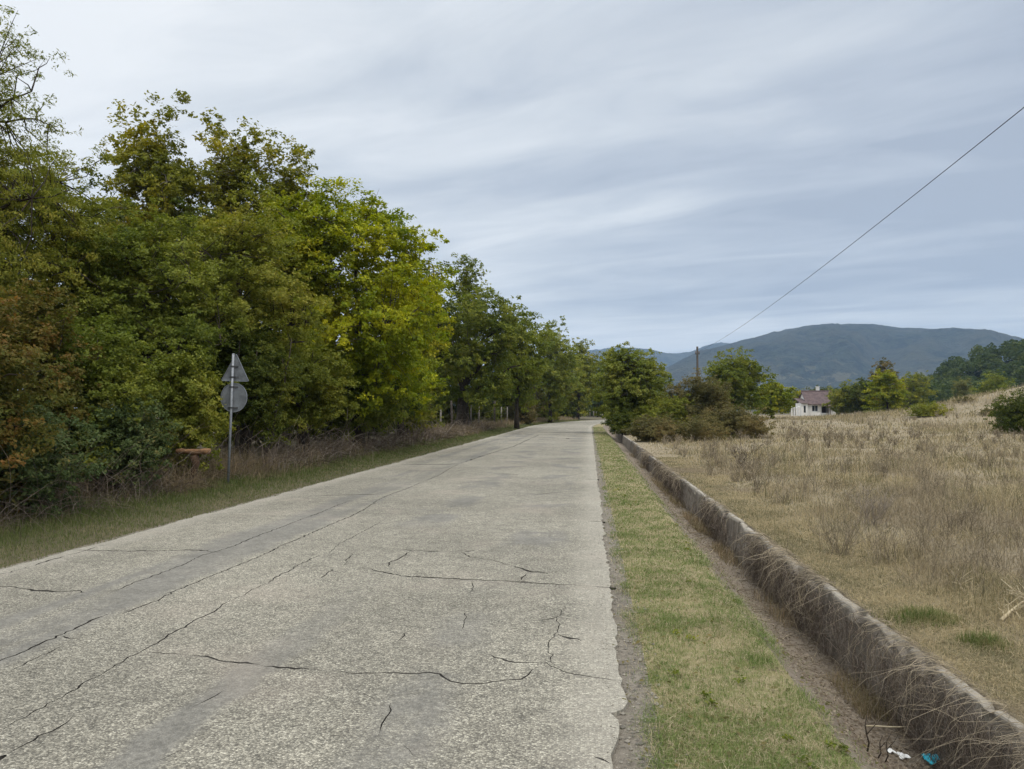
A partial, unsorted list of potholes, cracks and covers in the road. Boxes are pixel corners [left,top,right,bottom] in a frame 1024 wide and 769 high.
crack [0,522,618,760]
crack [0,494,372,593]
